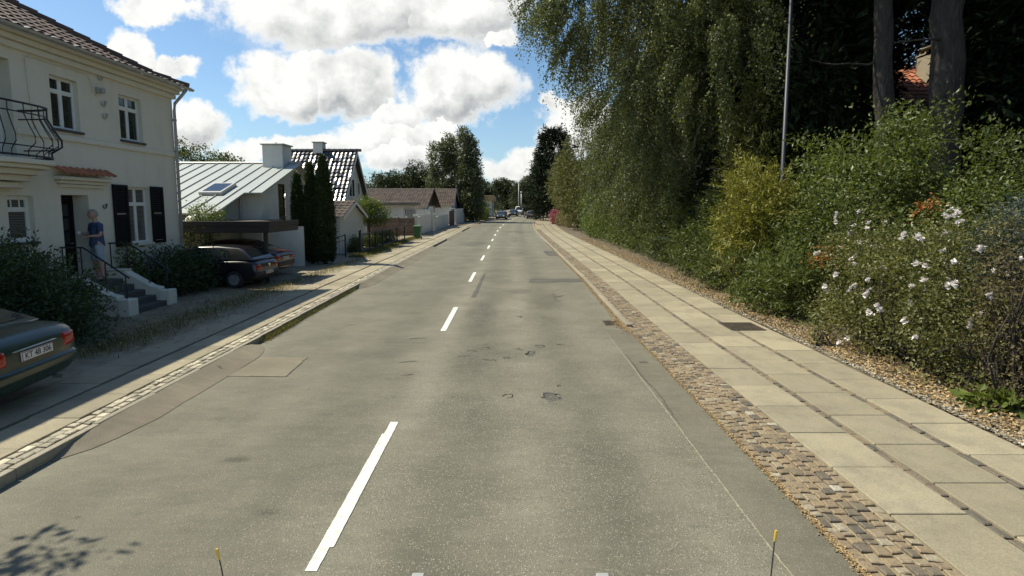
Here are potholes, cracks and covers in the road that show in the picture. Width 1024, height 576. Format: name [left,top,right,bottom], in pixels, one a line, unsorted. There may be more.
pothole [536,391,569,404]
manhole cover [718,322,766,331]
